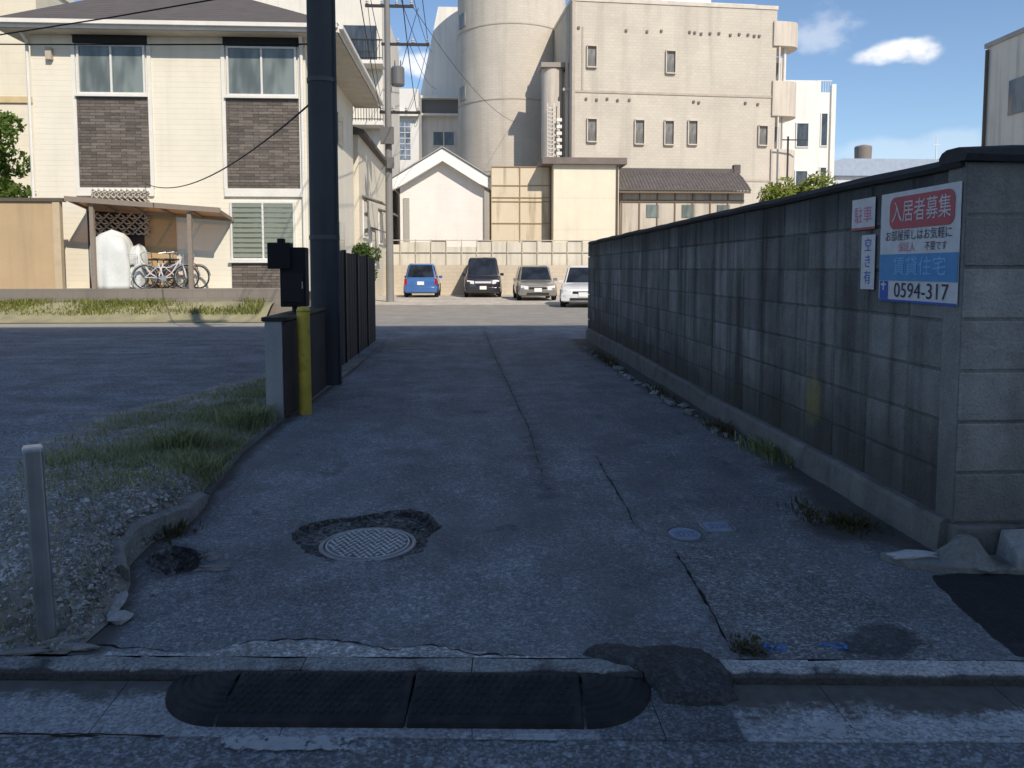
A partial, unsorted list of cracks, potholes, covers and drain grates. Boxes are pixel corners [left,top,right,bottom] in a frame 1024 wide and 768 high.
pothole [145,545,204,576]
crack [596,457,635,525]
crack [675,551,728,642]
crack [485,333,543,478]
crack [230,638,524,659]
manhole cover [699,521,736,532]
manhole cover [319,527,416,562]
manhole cover [665,526,705,542]
